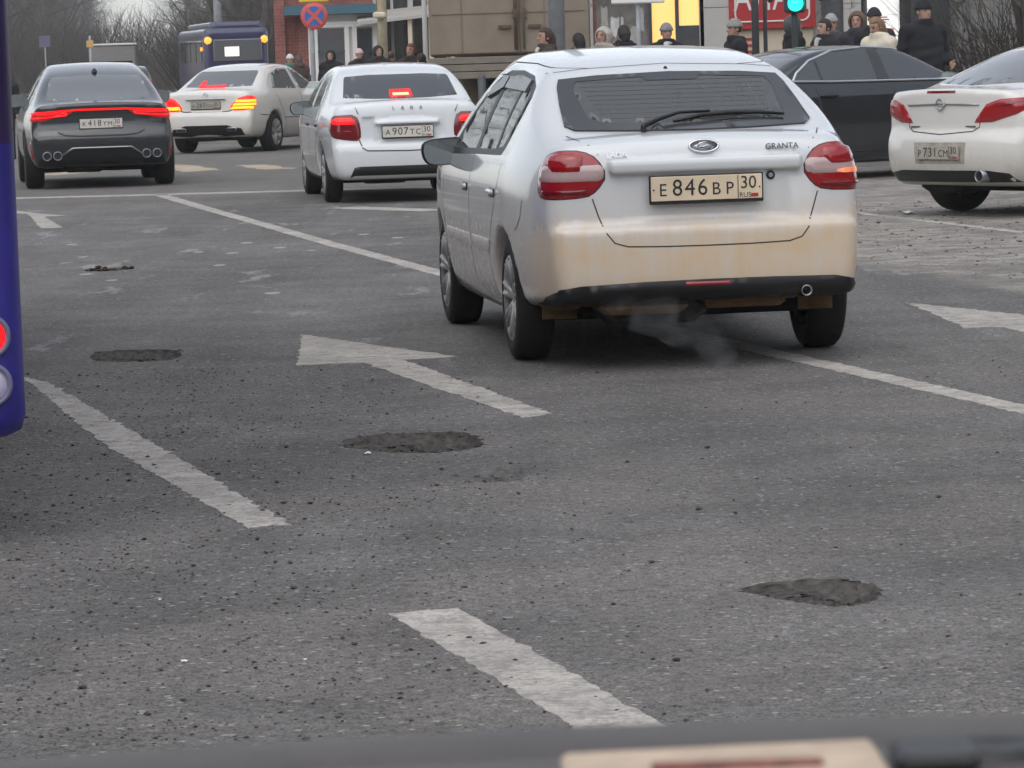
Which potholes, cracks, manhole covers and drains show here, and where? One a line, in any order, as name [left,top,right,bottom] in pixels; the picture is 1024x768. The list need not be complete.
pothole [720,578,907,607]
pothole [90,346,183,362]
pothole [317,431,489,453]
